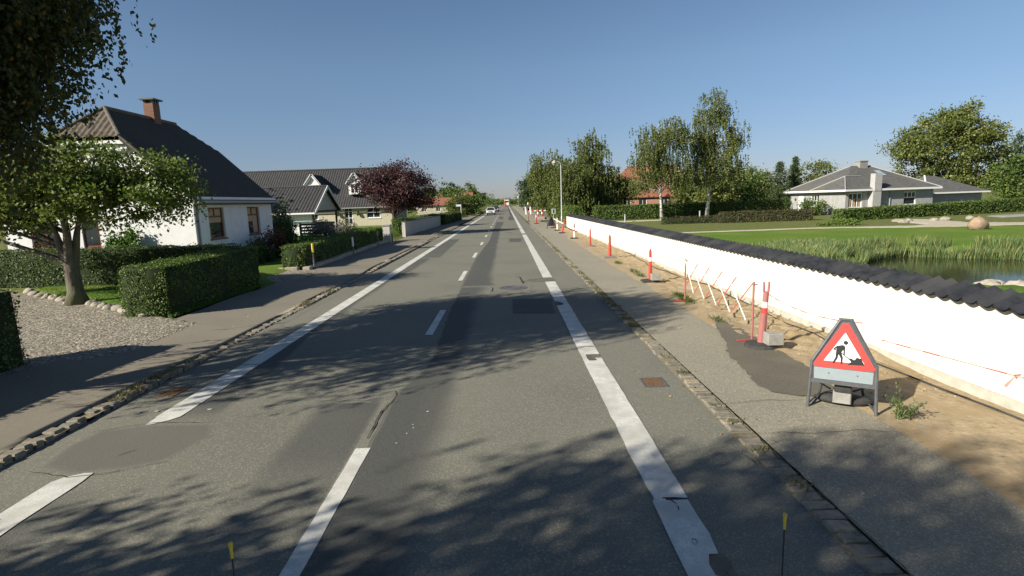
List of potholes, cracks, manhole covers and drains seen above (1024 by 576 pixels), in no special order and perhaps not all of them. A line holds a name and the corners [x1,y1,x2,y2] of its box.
crack [662,497,688,510]
crack [326,391,397,438]
